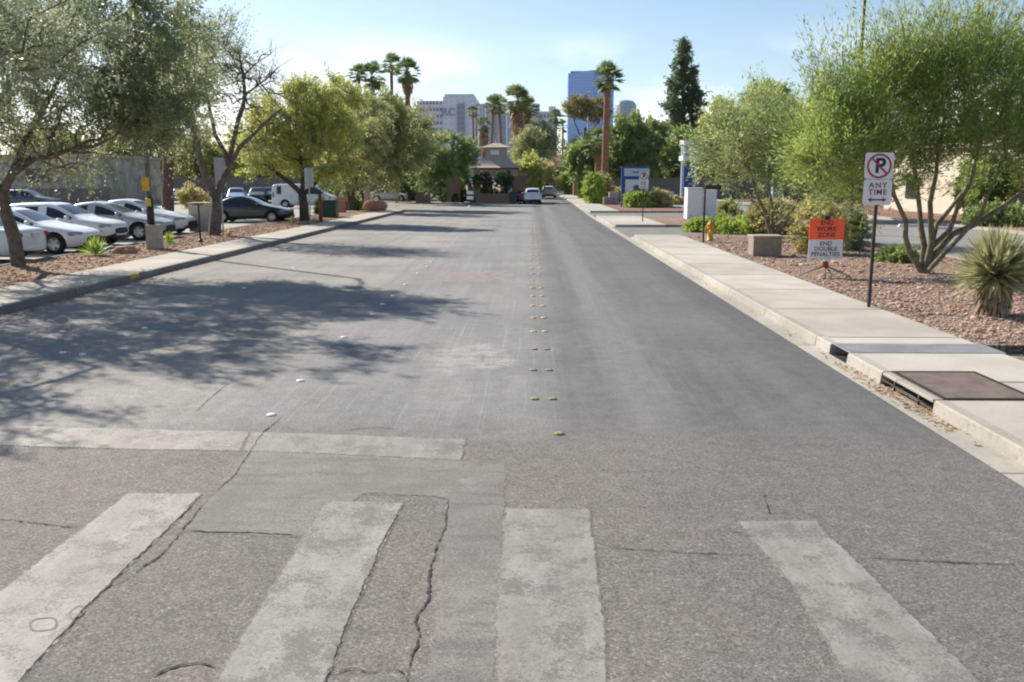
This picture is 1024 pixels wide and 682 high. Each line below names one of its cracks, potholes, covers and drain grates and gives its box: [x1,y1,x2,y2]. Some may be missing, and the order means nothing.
crack [21,417,294,678]
drain grate [881,371,1024,409]
crack [325,492,449,682]
